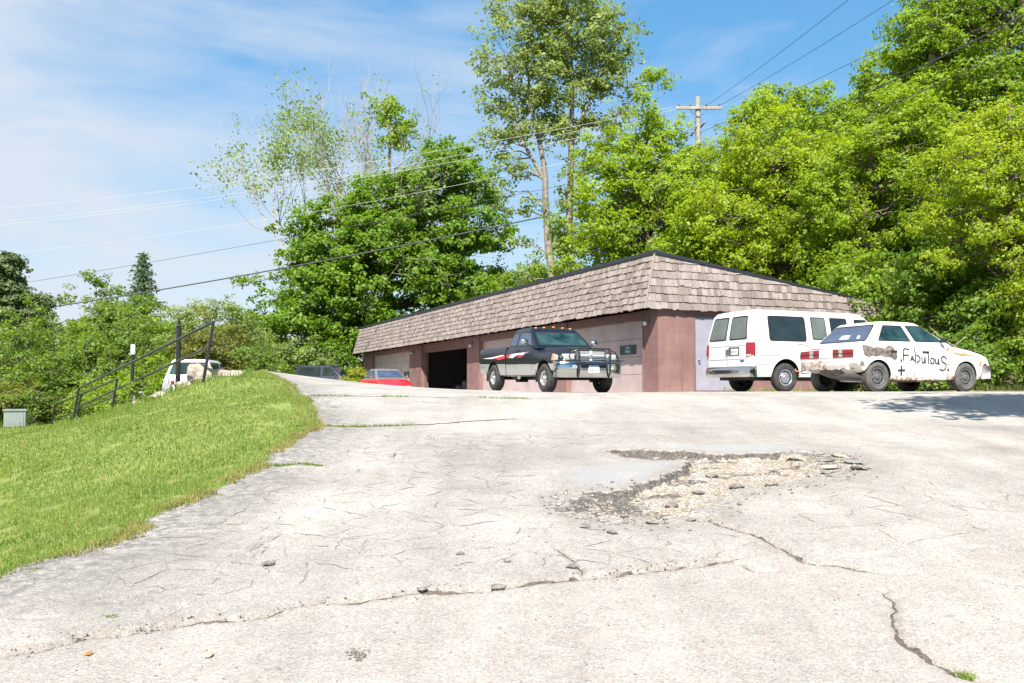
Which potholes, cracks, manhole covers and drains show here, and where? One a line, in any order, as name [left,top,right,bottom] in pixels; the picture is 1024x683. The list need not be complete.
crack [446,520,871,575]
pothole [538,448,874,526]
crack [882,593,973,682]
crack [68,432,715,595]
